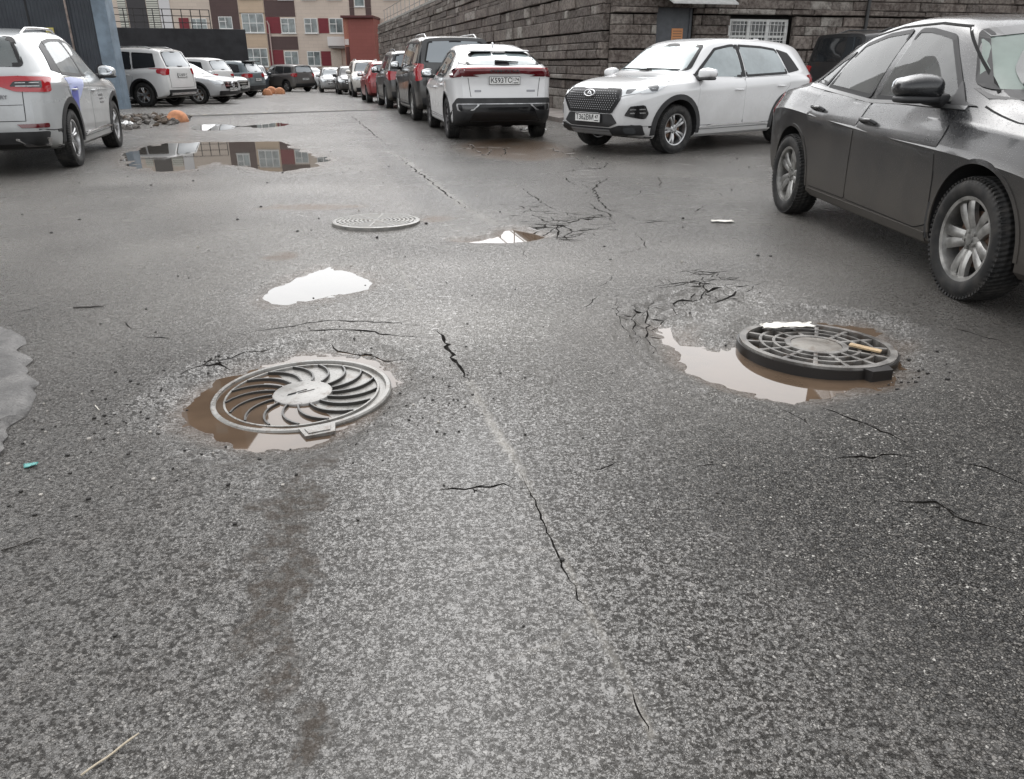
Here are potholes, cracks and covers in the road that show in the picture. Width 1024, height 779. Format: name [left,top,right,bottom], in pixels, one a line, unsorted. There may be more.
pothole [634,288,917,409]
pothole [447,227,551,242]
crack [457,145,722,256]
manhole cover [210,359,392,439]
pothole [161,337,417,457]
manhole cover [332,213,420,231]
crack [901,501,1020,536]
crack [183,350,266,373]
crack [444,473,597,631]
crack [589,269,765,353]
crack [826,409,908,459]
crack [268,320,413,362]
